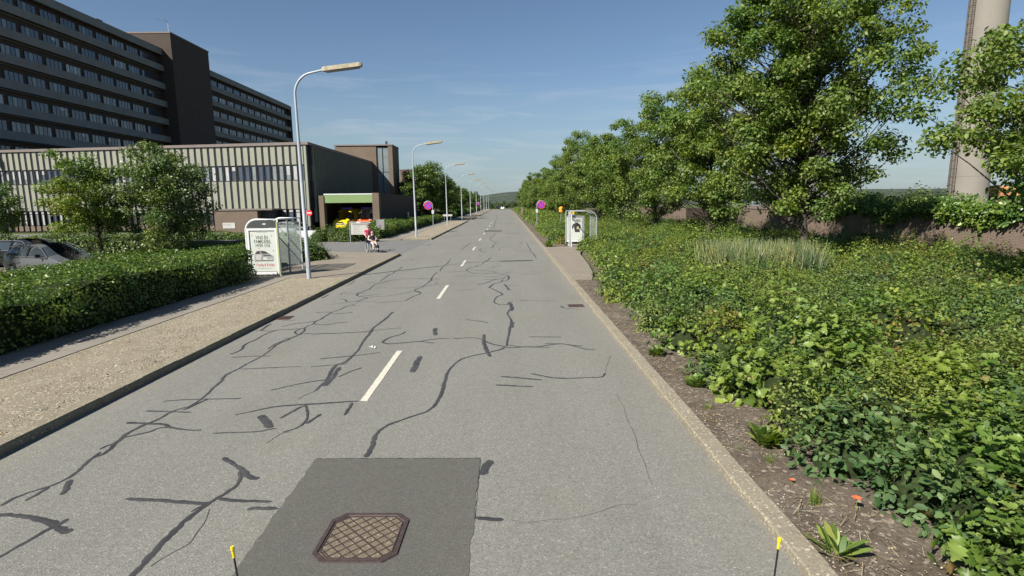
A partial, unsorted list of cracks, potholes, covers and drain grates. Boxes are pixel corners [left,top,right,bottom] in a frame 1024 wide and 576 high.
crack [616,394,652,484]
crack [338,272,439,304]
manhole cover [312,513,410,563]
